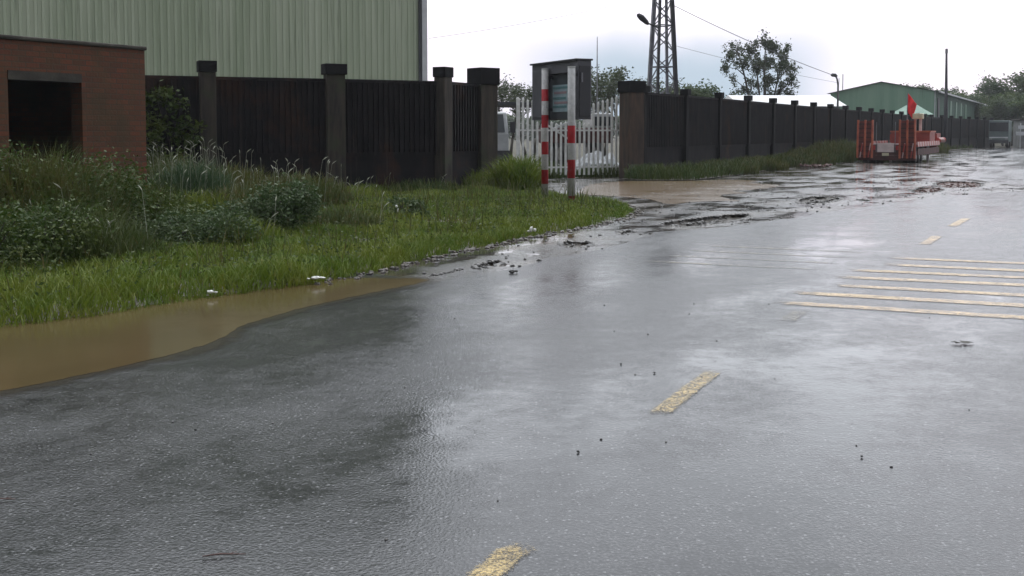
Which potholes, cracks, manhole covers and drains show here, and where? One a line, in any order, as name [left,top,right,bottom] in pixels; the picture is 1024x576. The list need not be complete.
pothole [658,213,753,227]
pothole [795,195,845,205]
